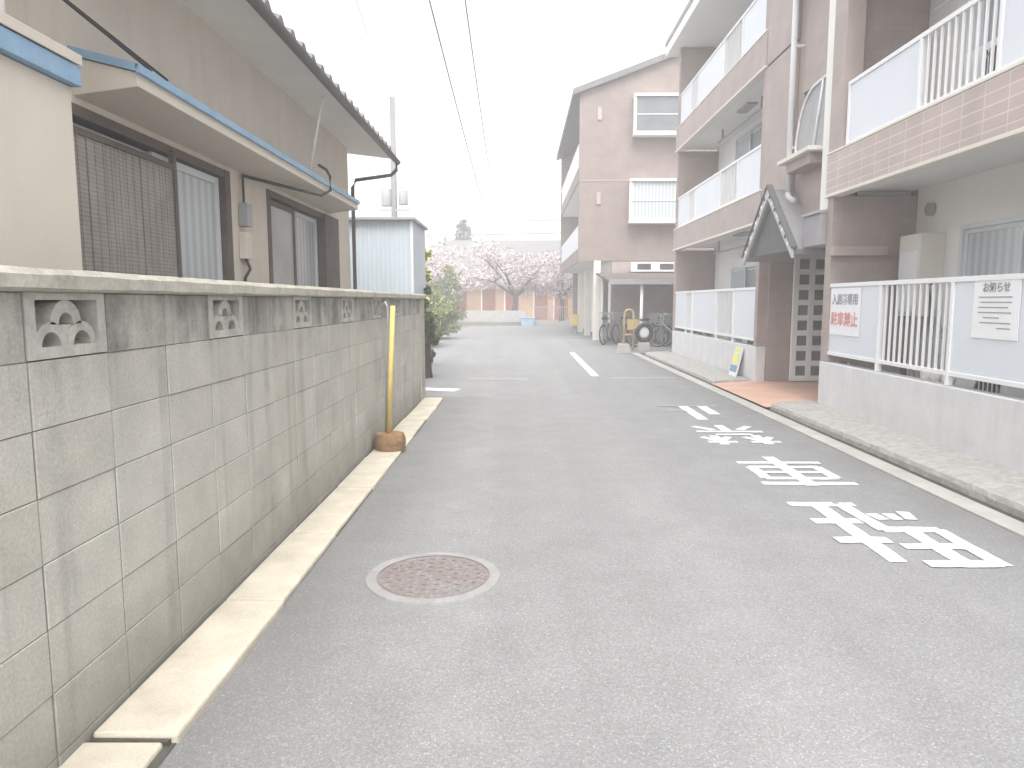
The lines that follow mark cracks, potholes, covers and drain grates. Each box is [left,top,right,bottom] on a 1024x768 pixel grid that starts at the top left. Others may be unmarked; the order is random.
manhole cover [365,552,500,605]
